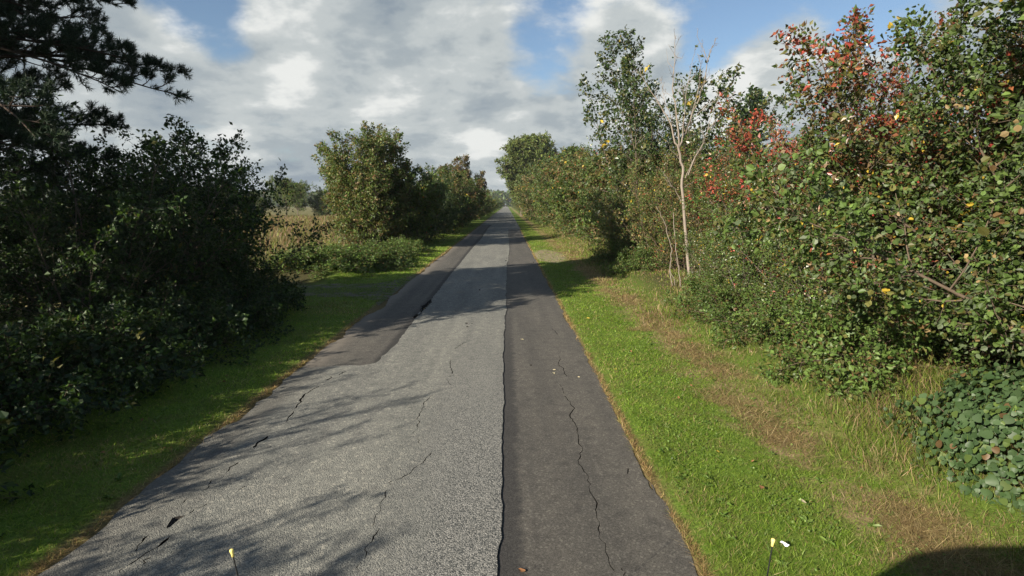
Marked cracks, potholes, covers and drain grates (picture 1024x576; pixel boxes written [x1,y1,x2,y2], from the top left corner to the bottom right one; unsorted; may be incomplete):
crack [183,436,268,513]
crack [119,536,169,573]
crack [558,356,625,576]
crack [286,371,346,422]
crack [356,342,465,573]
